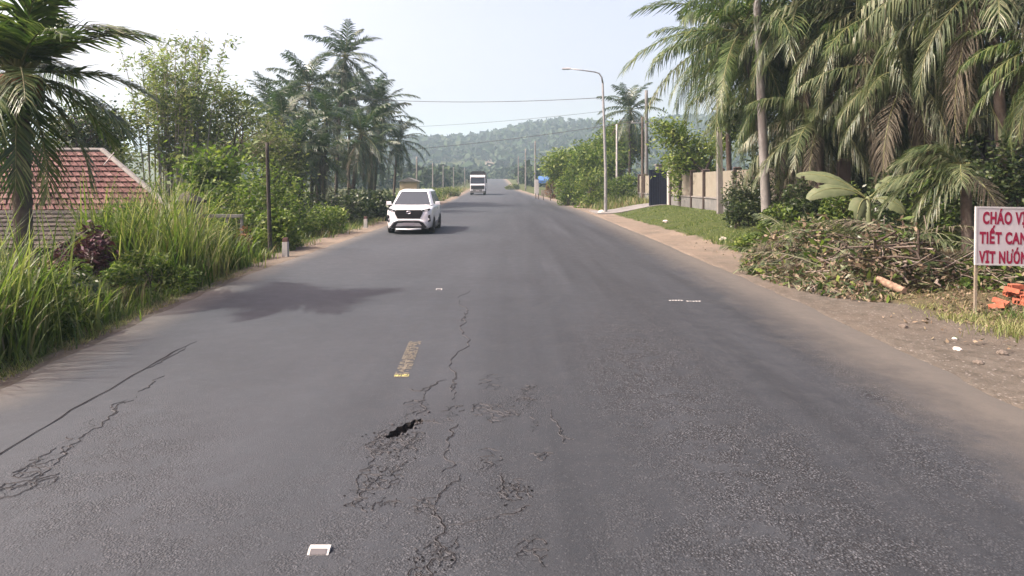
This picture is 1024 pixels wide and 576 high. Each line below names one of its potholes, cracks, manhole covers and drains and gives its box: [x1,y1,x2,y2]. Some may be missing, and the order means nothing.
crack [0,341,197,500]
crack [343,291,574,576]
pothole [375,411,434,440]
